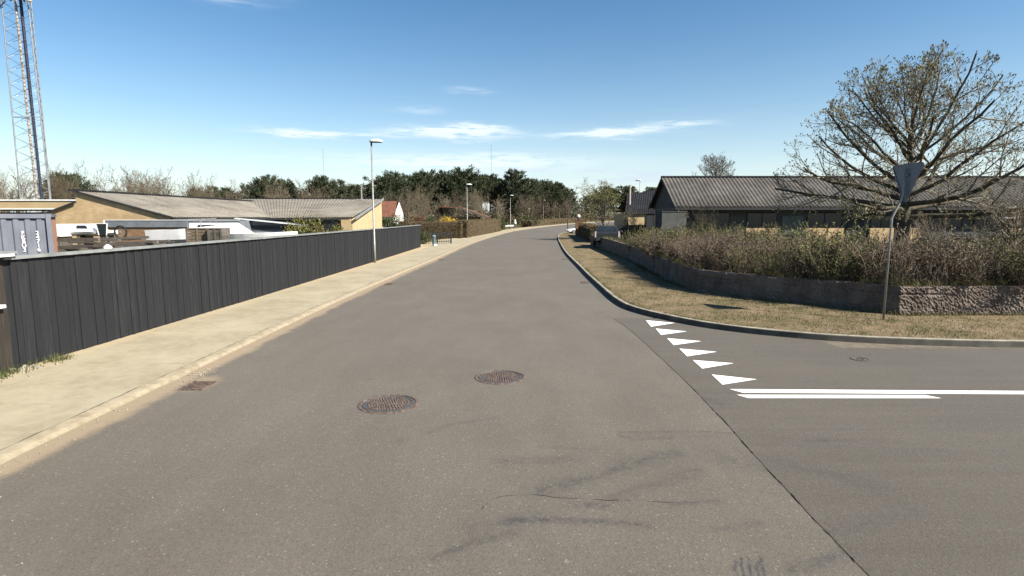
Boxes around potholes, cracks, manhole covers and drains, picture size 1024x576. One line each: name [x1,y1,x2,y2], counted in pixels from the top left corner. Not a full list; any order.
manhole cover [475,370,526,385]
manhole cover [357,394,419,414]
drain grate [177,381,217,390]
